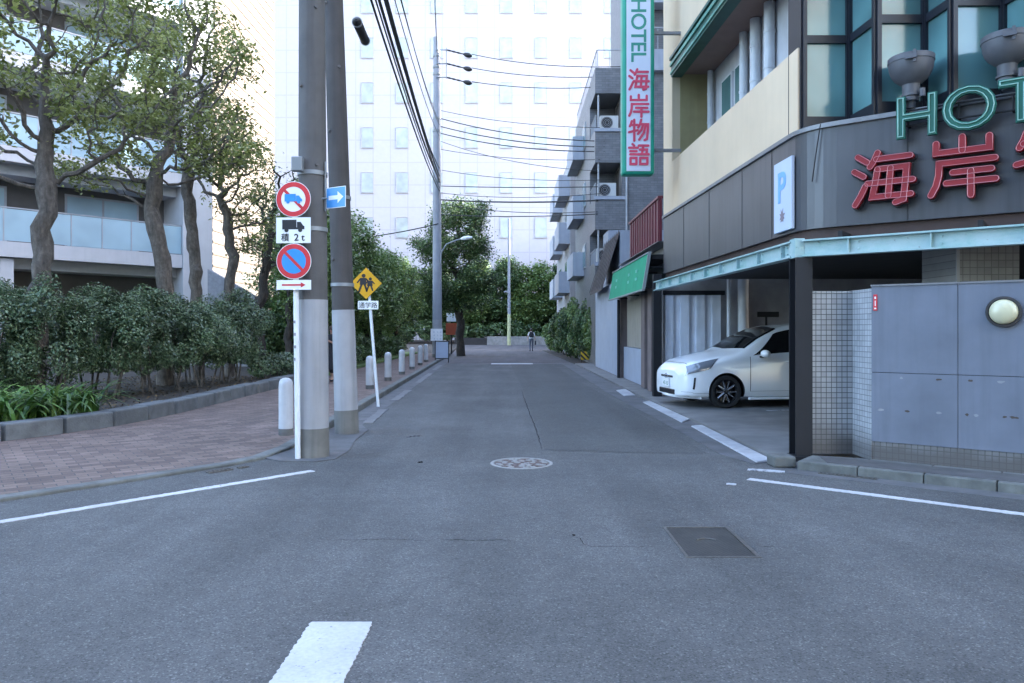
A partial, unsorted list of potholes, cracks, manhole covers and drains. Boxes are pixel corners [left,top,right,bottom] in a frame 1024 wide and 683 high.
utility cover [663,527,762,558]
manhole cover [490,457,553,469]
